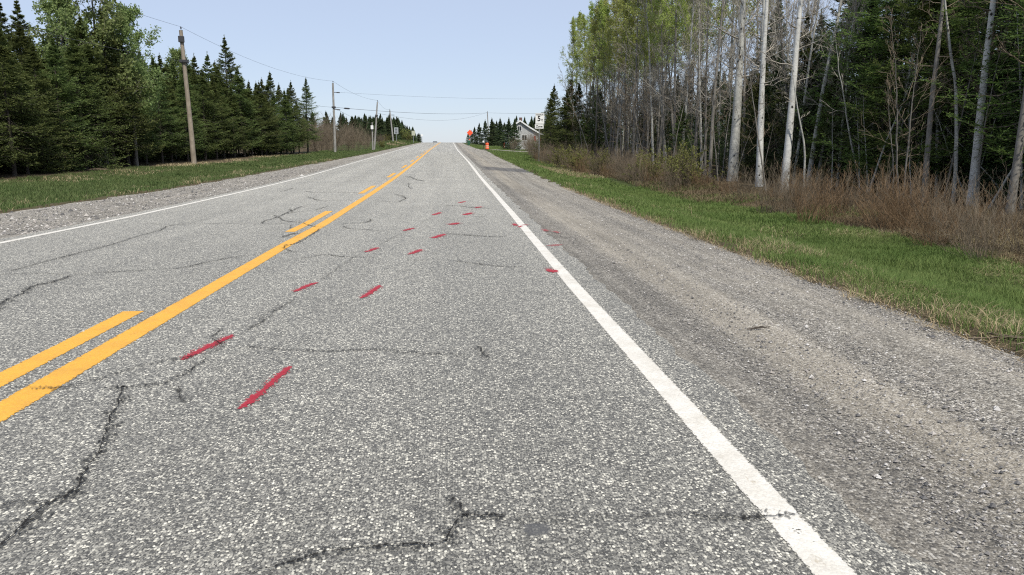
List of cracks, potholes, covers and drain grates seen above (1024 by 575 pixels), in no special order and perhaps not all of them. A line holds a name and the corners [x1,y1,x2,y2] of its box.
crack [0,316,464,547]
crack [0,188,357,311]
crack [249,496,805,572]
